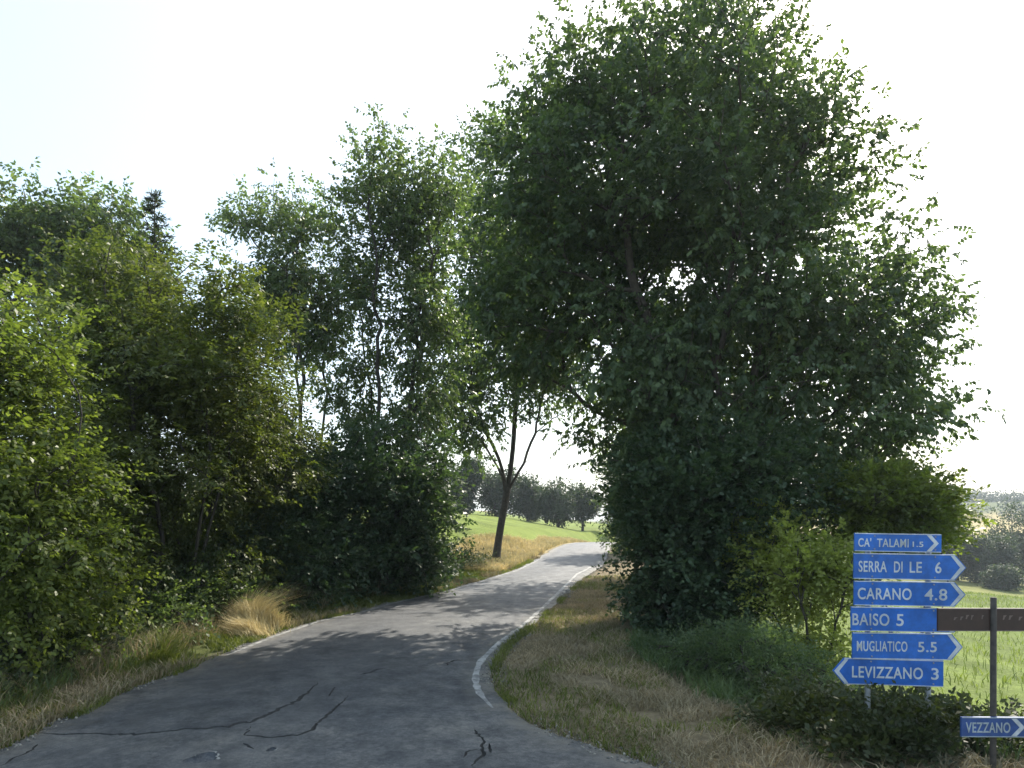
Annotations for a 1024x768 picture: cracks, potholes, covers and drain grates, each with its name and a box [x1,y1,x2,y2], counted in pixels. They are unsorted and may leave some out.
crack [463,729,492,767]
pothole [182,751,220,764]
crack [3,682,346,765]
